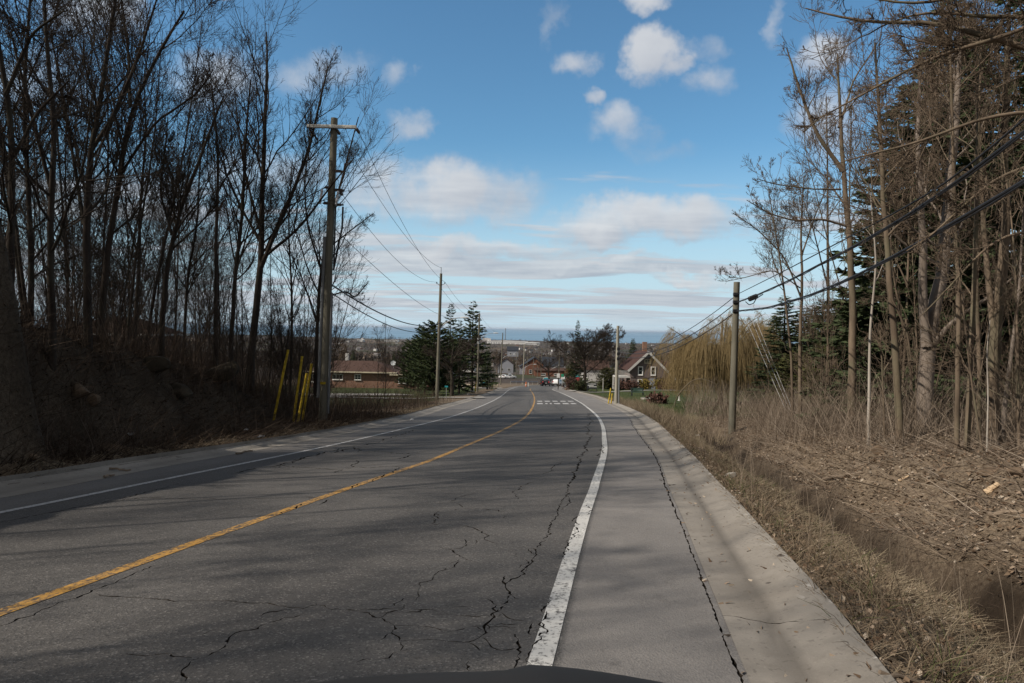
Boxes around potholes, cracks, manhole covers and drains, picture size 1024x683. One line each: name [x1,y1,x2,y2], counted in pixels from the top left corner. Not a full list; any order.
crack [342,413,604,670]
crack [723,615,830,624]
crack [1,565,341,681]
